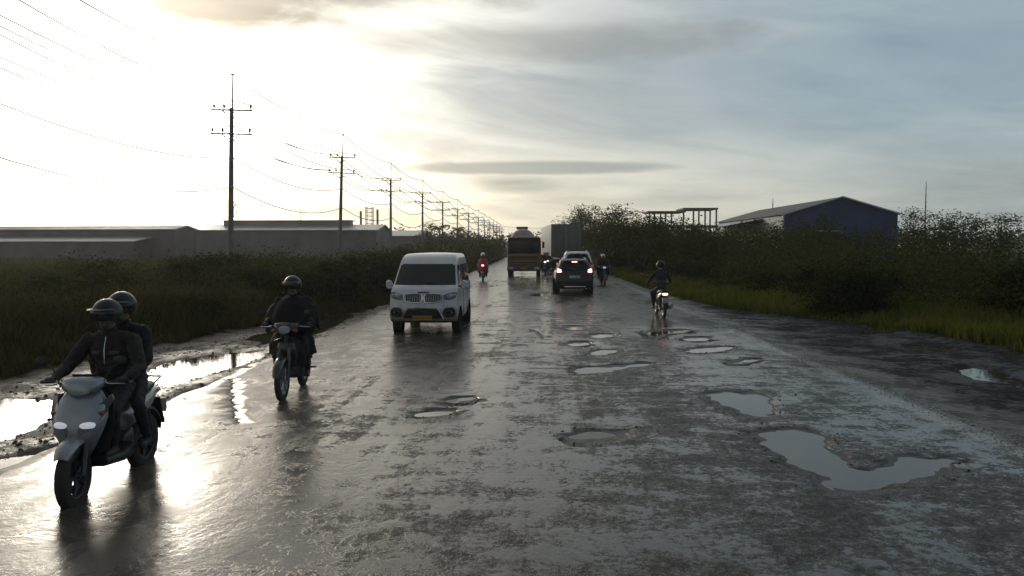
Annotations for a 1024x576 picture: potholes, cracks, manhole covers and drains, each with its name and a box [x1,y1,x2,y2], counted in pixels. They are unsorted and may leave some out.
pothole [646,330,691,338]
pothole [572,363,652,374]
pothole [563,430,629,443]
pothole [750,428,967,493]
pothole [703,391,775,418]
